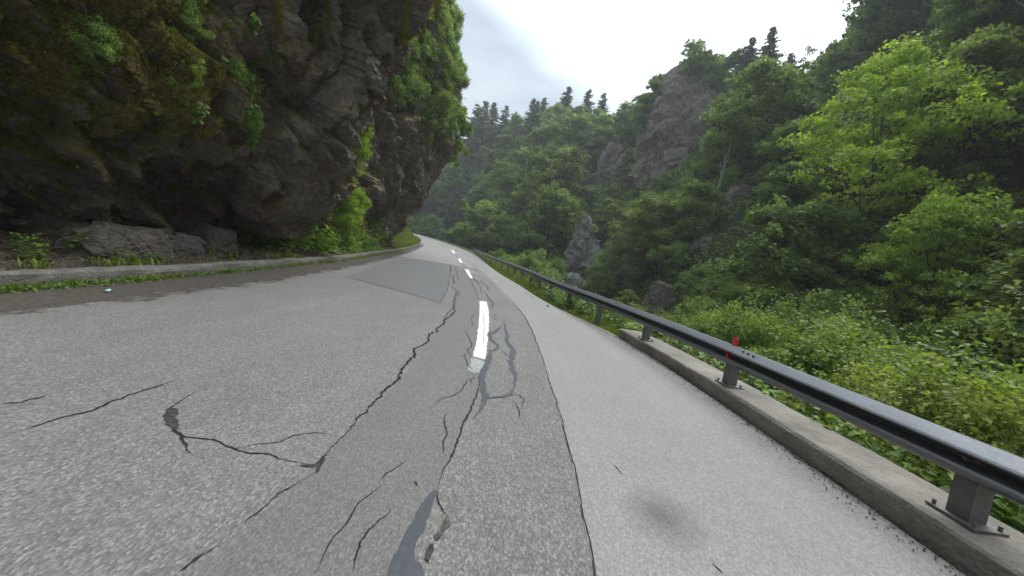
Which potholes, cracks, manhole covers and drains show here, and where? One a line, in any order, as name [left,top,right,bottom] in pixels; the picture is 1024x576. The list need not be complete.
crack [7,260,495,526]
crack [318,461,404,568]
